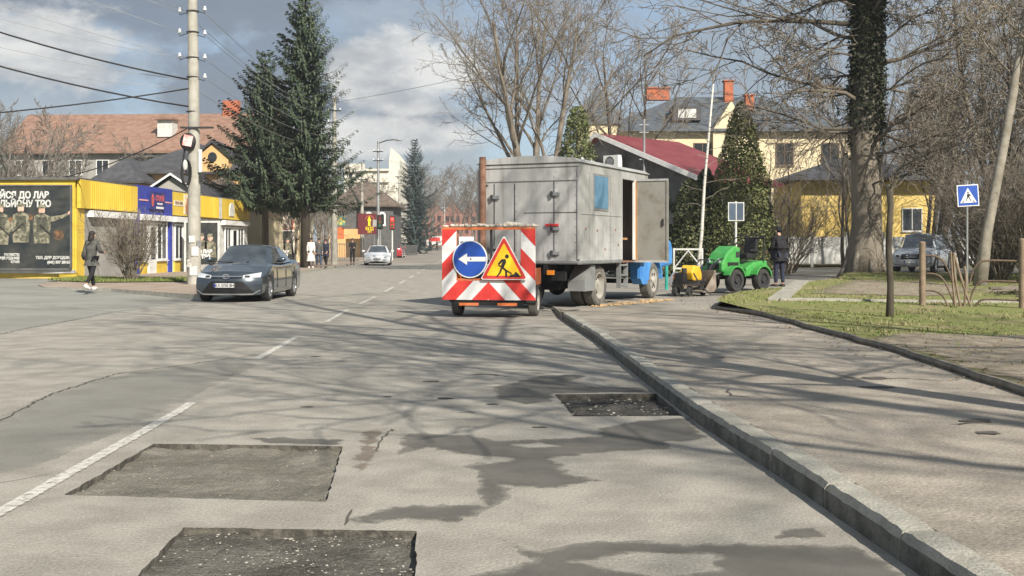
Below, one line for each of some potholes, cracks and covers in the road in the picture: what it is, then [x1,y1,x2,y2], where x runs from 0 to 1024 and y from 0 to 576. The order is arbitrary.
pothole [65,444,343,502]
pothole [138,527,417,576]
pothole [555,394,682,416]
